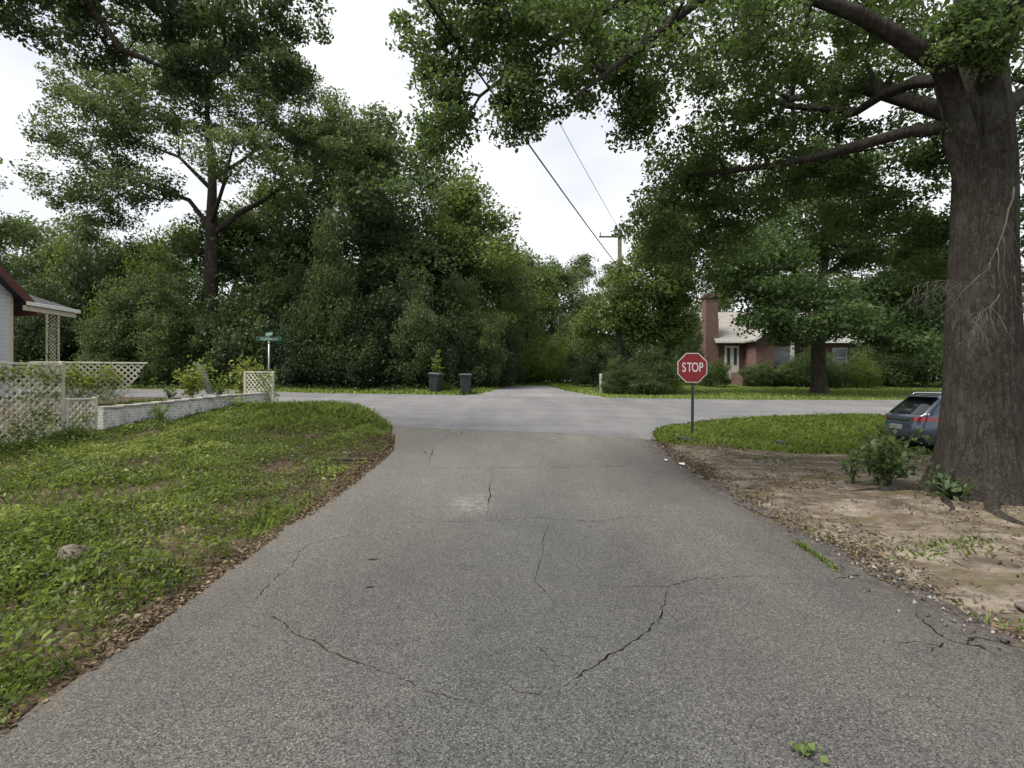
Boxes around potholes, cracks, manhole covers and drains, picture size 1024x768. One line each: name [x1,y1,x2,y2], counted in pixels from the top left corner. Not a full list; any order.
crack [887,613,1024,654]
crack [251,532,487,711]
crack [534,576,807,697]
crack [370,431,634,604]
